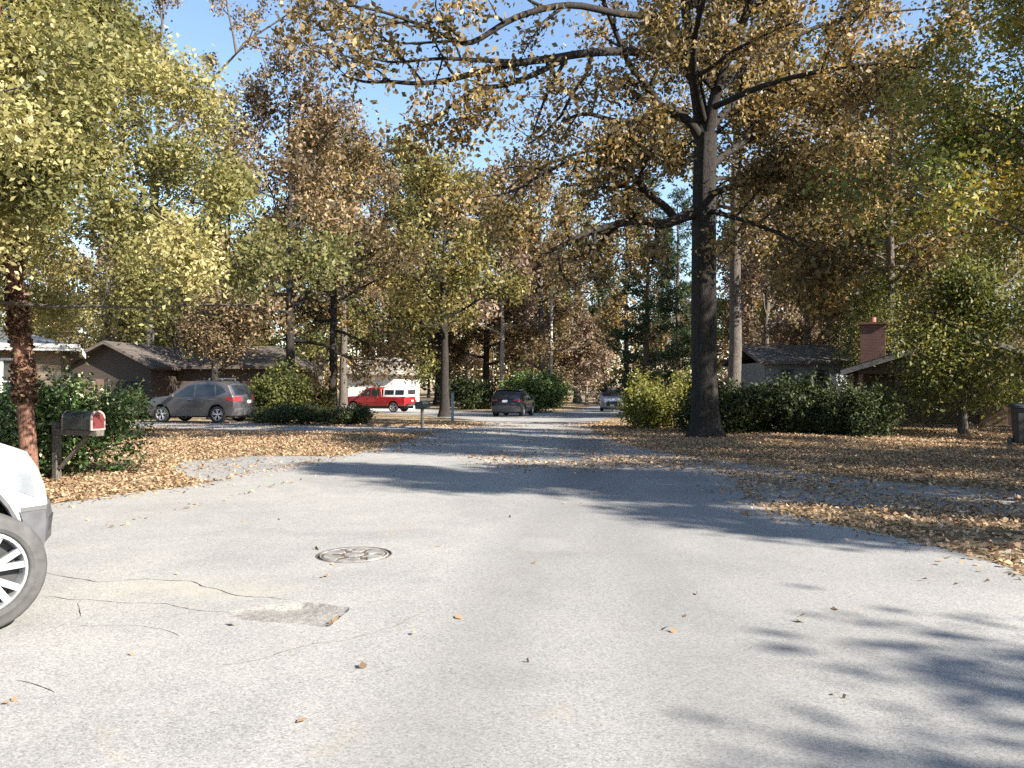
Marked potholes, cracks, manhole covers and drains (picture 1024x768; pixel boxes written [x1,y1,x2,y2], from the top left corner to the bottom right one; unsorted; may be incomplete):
manhole cover [315,547,392,563]
crack [38,573,288,635]
crack [216,609,430,668]
